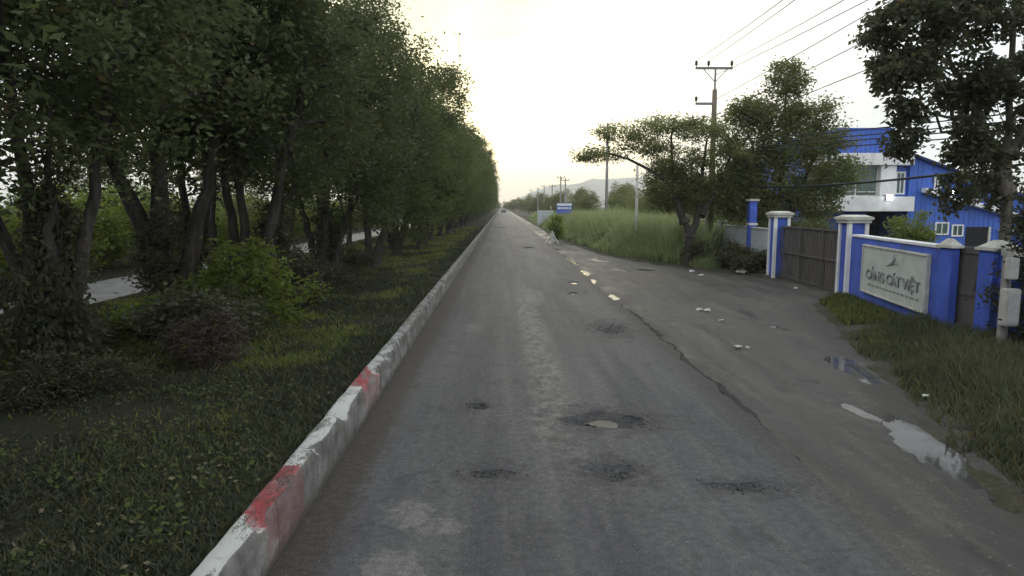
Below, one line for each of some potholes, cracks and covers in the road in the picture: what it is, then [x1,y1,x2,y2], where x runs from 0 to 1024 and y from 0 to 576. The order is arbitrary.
crack [621,304,769,431]
pothole [465,401,490,410]
pothole [457,469,529,480]
pothole [595,324,632,335]
pothole [696,479,782,495]
pothole [554,409,660,430]
pothole [578,459,645,484]
